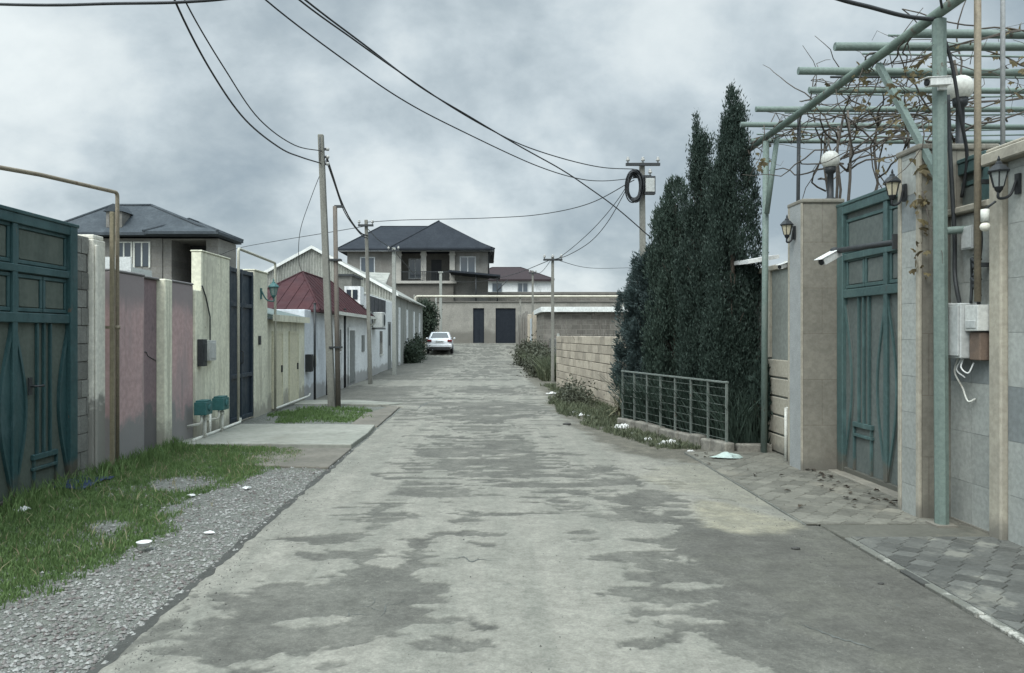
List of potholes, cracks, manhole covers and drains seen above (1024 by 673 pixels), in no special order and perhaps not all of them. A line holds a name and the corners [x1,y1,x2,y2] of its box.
crack [801,624,878,651]
